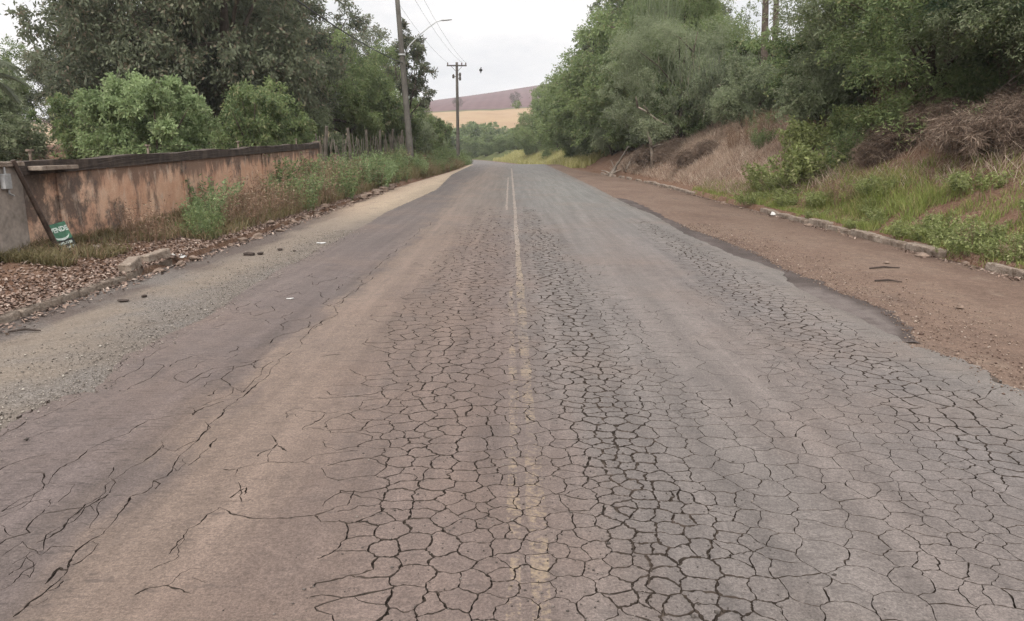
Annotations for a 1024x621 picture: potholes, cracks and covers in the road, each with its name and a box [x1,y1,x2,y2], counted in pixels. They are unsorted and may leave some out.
crack [135,208,1024,621]
crack [0,224,431,617]
